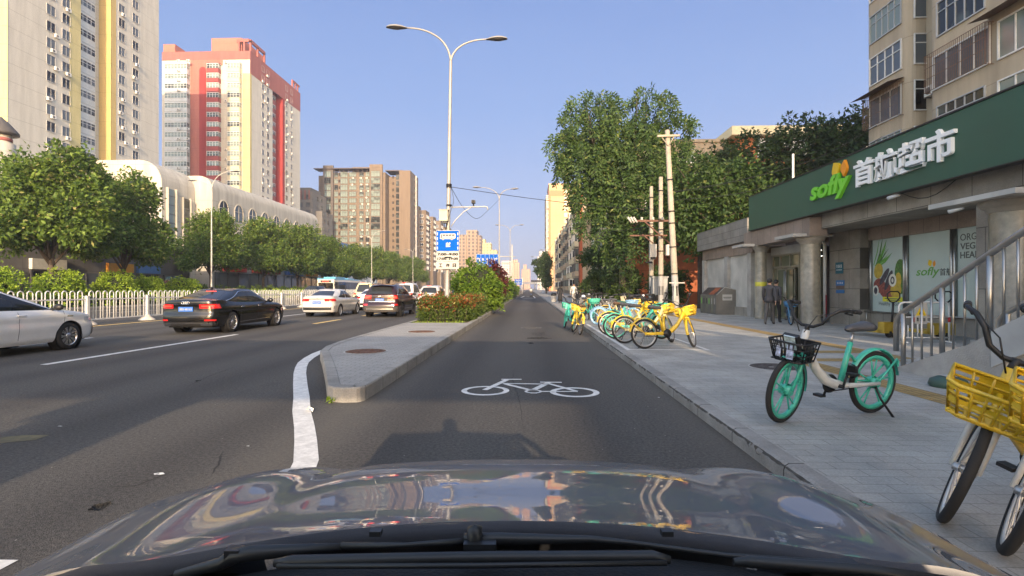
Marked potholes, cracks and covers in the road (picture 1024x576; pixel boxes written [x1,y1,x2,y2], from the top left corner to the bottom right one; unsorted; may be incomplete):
manhole cover [748,363,796,371]
